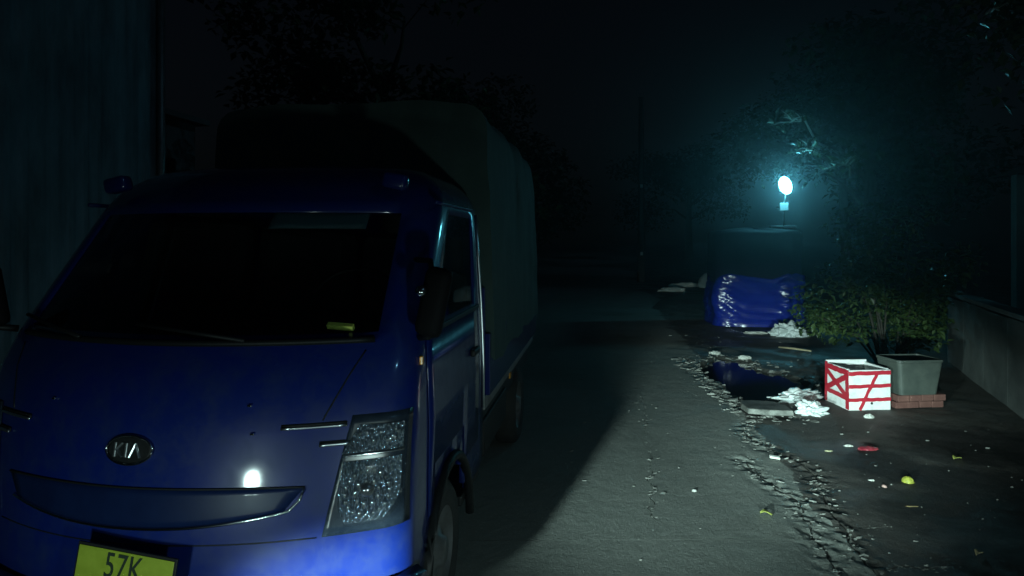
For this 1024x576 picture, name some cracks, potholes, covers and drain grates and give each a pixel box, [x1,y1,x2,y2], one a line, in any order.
crack [735,421,948,576]
pothole [671,355,819,424]
crack [633,398,666,525]
